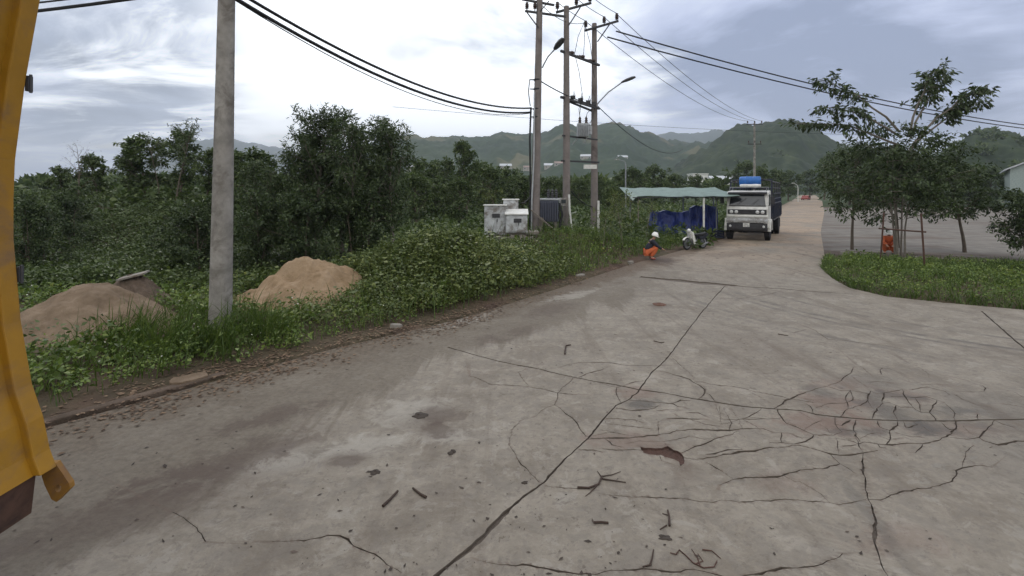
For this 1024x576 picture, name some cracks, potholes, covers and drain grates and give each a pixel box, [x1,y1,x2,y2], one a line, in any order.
crack [471,362,652,490]
crack [586,359,1024,576]
pothole [641,446,684,466]
crack [272,535,402,573]
crack [479,560,722,576]
